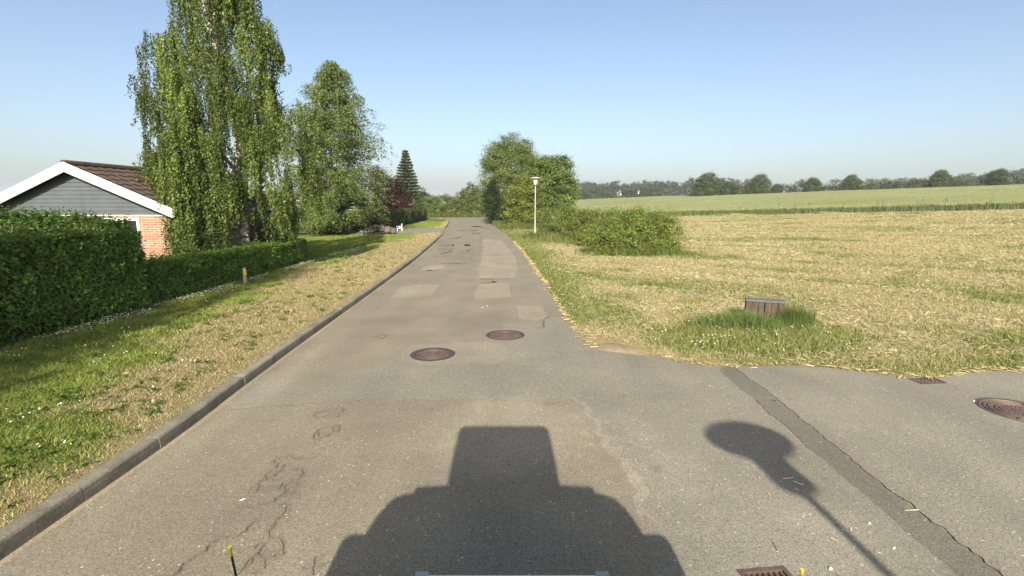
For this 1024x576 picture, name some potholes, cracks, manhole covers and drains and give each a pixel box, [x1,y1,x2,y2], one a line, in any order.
manhole cover [410,348,455,361]
crack [174,399,551,576]
drain grate [736,566,793,576]
manhole cover [974,398,1024,422]
manhole cover [486,330,525,340]
